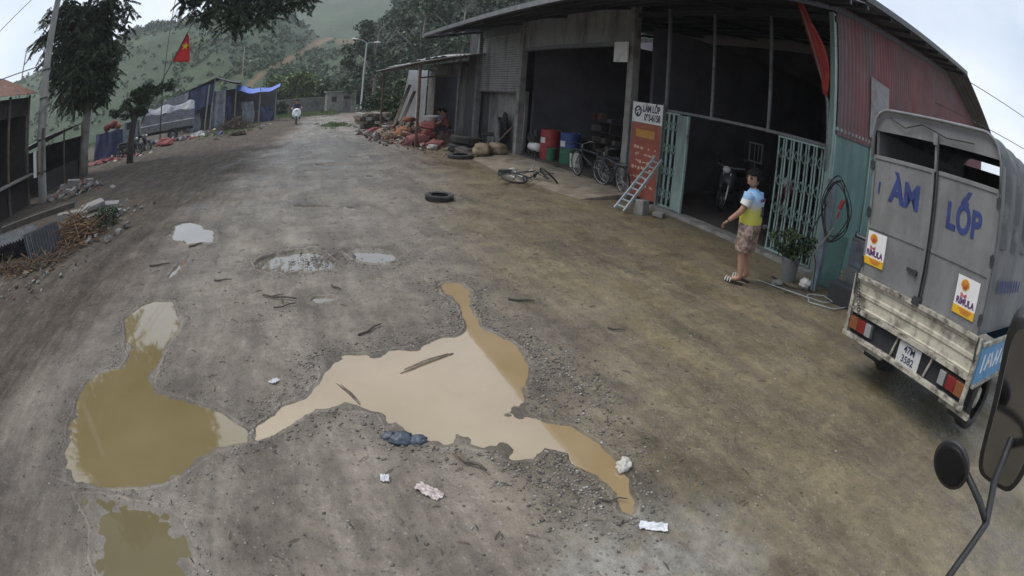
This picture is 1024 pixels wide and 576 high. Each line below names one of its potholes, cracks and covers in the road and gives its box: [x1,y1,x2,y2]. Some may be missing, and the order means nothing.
pothole [71,491,197,576]
pothole [51,299,257,491]
pothole [247,280,642,519]
pothole [163,221,219,245]
pothole [251,246,338,274]
pothole [341,248,408,265]
